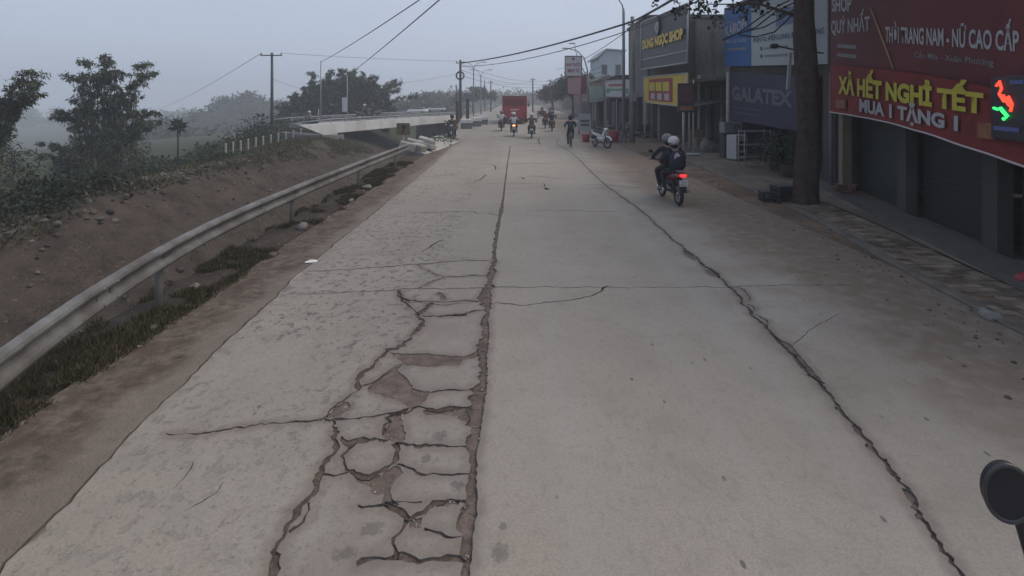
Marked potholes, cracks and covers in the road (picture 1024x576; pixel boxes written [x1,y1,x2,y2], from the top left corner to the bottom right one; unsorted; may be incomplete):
crack [166,138,965,576]
